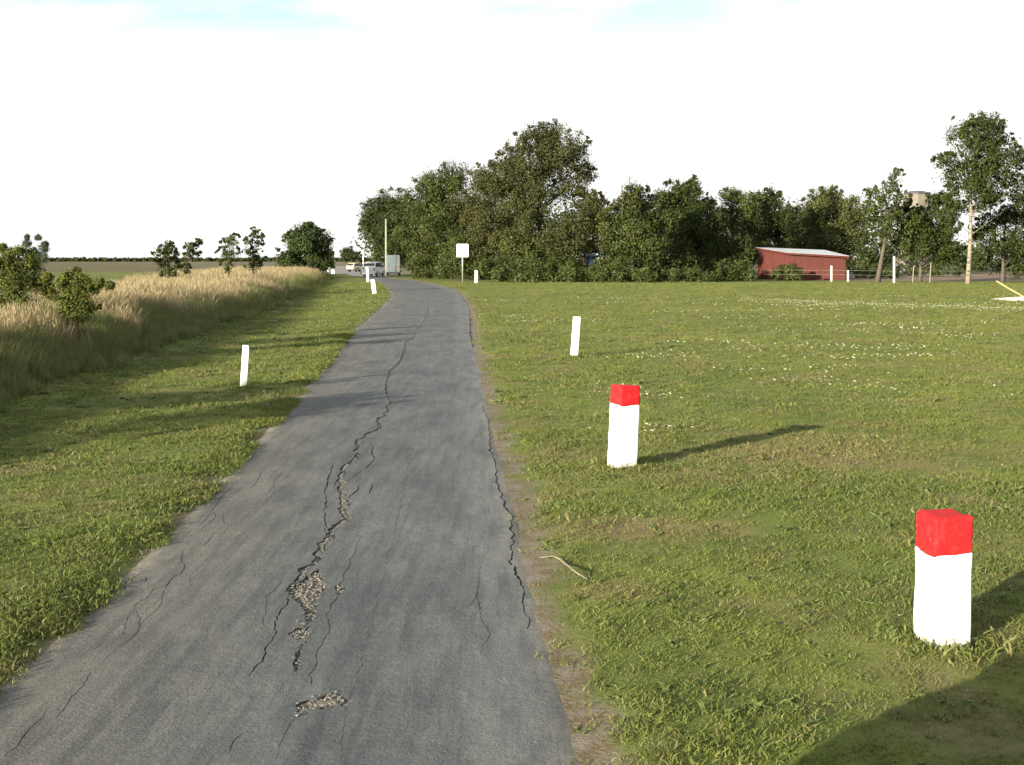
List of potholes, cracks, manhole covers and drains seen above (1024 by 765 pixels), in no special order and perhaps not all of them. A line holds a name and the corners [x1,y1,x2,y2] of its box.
crack [471,567,500,655]
crack [482,405,531,629]
pothole [292,641,307,672]
pothole [287,625,312,642]
pothole [294,690,353,717]
crack [249,305,431,686]
pothole [283,569,327,624]
crack [2,552,197,759]
